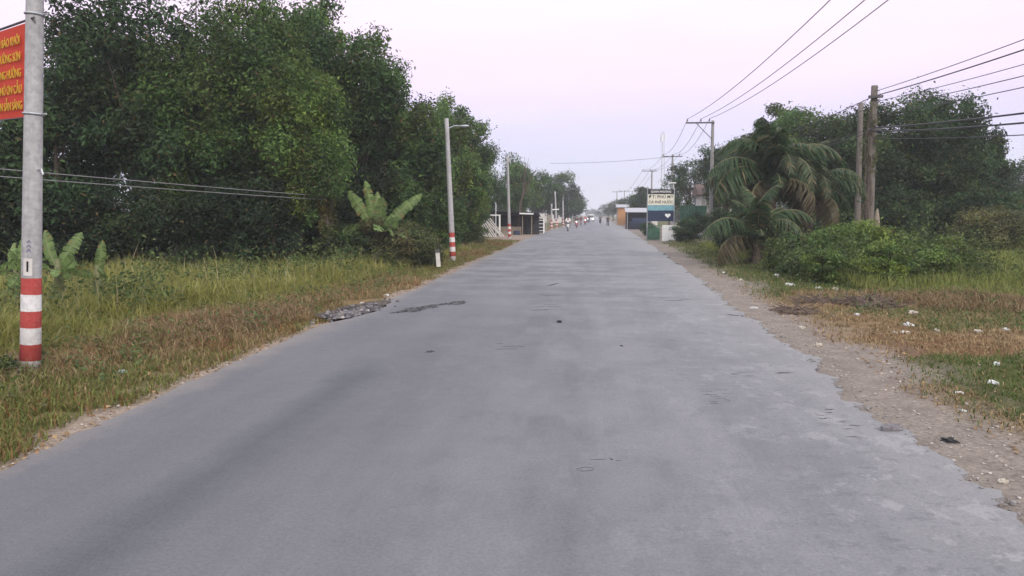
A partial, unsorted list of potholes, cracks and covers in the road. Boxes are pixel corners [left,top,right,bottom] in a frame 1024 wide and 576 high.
pothole [316,300,391,321]
pothole [392,304,438,313]
